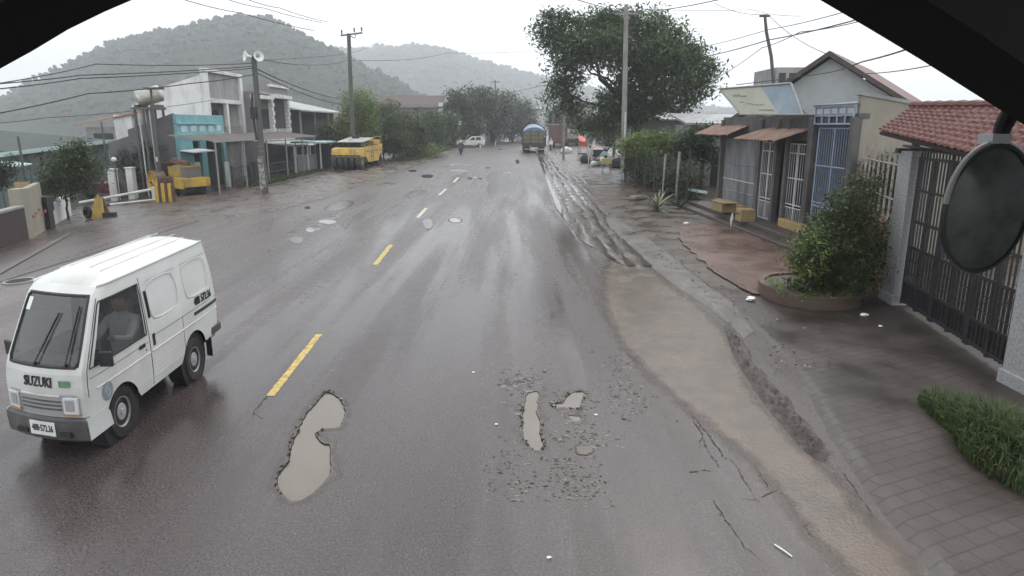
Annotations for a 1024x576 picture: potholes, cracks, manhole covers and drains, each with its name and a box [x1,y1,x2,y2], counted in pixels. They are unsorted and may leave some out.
pothole [549,390,588,410]
crack [625,354,795,507]
crack [713,500,753,553]
pothole [517,390,547,452]
manhole cover [2,277,36,285]
pothole [270,389,349,504]
